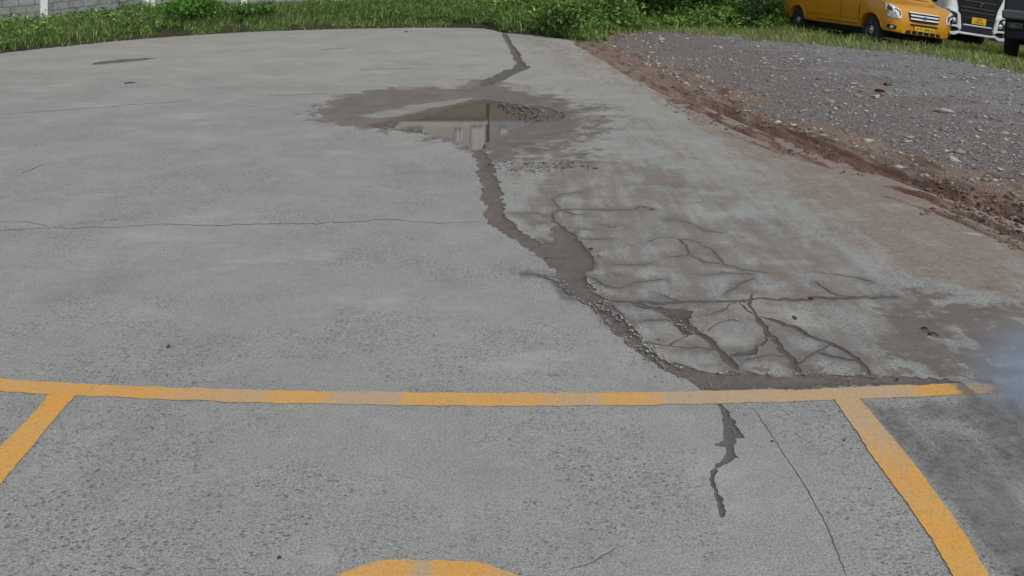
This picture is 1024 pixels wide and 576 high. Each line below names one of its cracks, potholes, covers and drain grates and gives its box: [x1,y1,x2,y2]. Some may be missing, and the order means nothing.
crack [479,34,530,86]
crack [569,548,616,570]
pothole [364,100,565,151]
crack [10,101,181,114]
crack [0,219,479,231]
crack [709,403,847,576]
crack [513,192,898,375]
